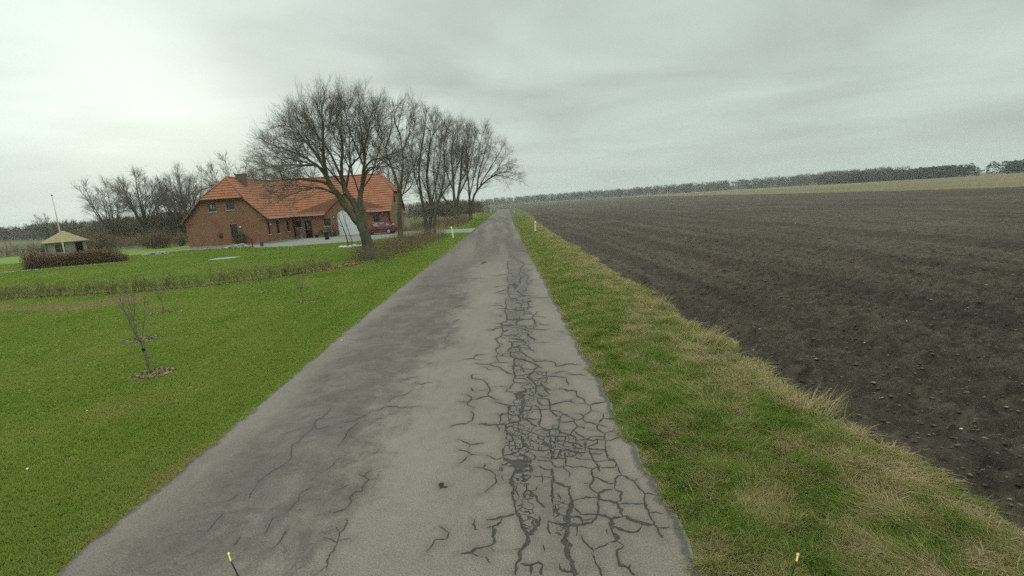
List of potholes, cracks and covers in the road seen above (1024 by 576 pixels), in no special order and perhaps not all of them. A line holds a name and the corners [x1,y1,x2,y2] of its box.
crack [426,250,670,576]
crack [207,377,430,576]
